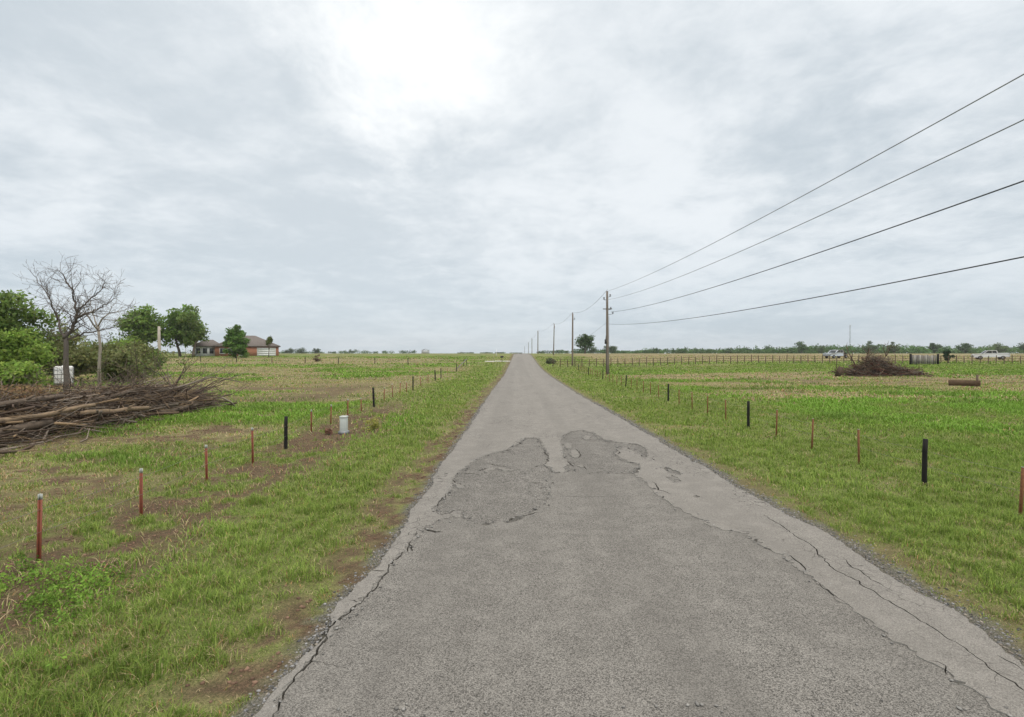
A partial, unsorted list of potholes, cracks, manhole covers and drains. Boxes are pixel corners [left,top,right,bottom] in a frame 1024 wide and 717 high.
crack [764,515,1024,690]
crack [272,441,521,717]
